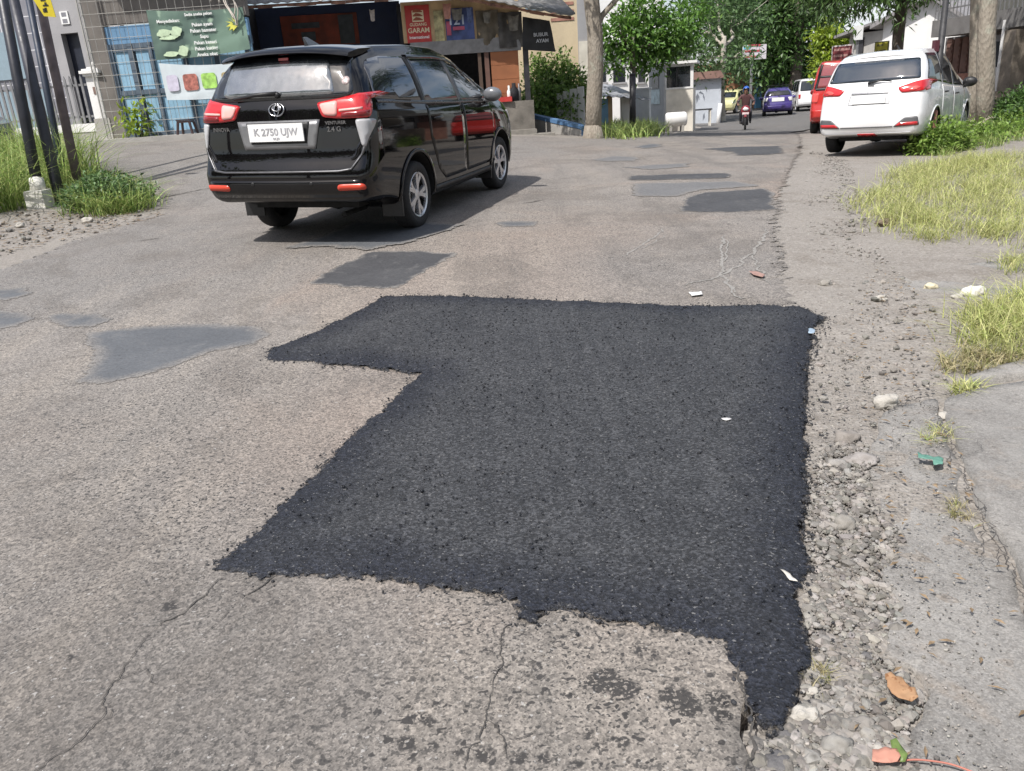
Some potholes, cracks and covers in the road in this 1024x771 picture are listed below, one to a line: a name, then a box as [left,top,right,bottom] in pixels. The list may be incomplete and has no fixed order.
crack [464,622,547,769]
crack [35,577,222,771]
crack [683,229,771,299]
